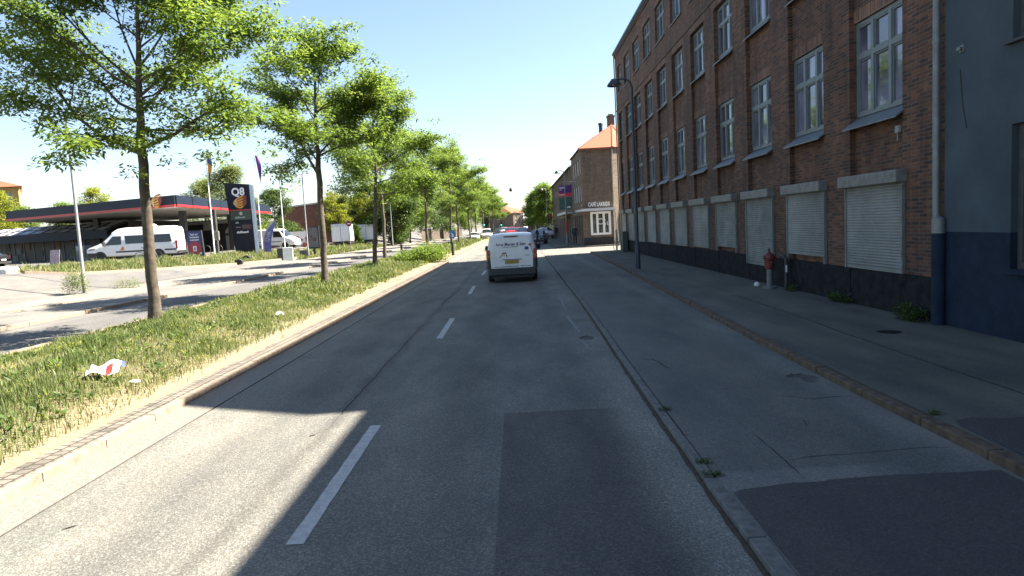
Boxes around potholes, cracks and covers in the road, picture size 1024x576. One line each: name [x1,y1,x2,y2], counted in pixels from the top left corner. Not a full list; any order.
crack [329,329,419,428]
crack [753,433,927,480]
